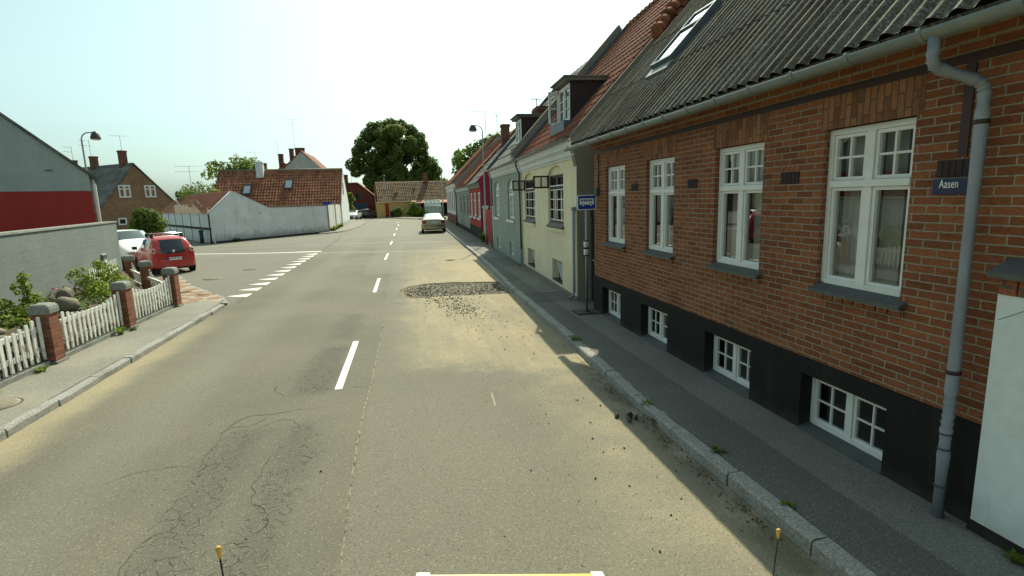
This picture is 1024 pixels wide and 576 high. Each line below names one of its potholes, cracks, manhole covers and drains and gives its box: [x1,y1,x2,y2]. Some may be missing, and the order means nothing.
pothole [399,282,511,298]
crack [110,407,323,576]
manhole cover [0,397,24,410]
